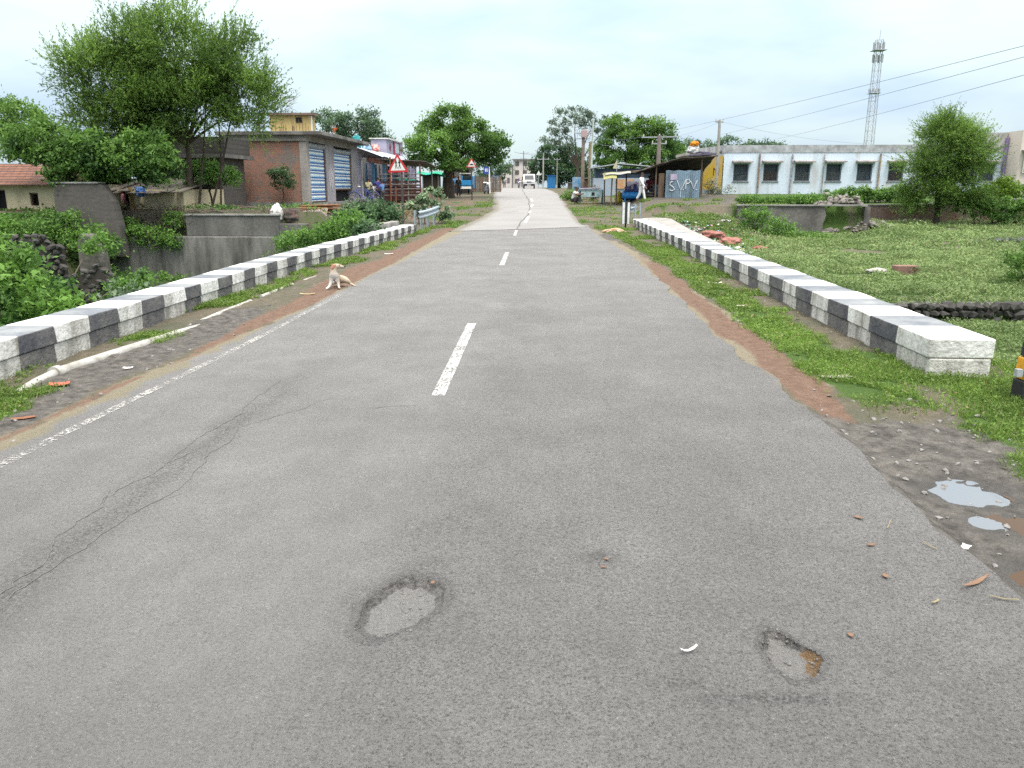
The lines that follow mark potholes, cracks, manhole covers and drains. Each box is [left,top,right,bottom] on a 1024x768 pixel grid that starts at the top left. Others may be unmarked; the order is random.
pothole [753,624,832,687]
pothole [342,568,456,646]
crack [0,380,323,604]
